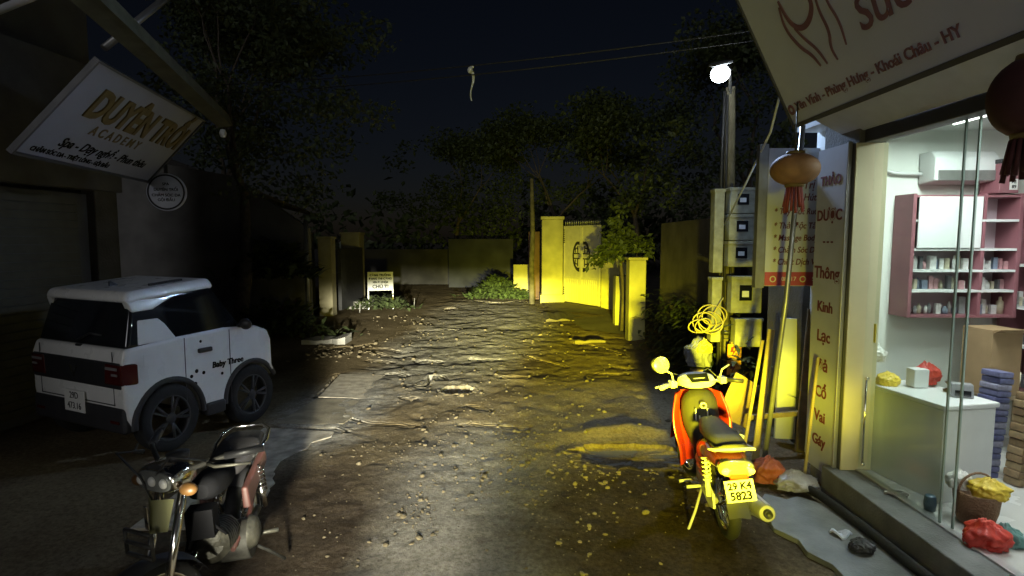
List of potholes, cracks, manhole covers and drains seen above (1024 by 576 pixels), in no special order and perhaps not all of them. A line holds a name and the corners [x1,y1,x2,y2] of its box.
pothole [558,442,694,471]
pothole [437,385,479,396]
